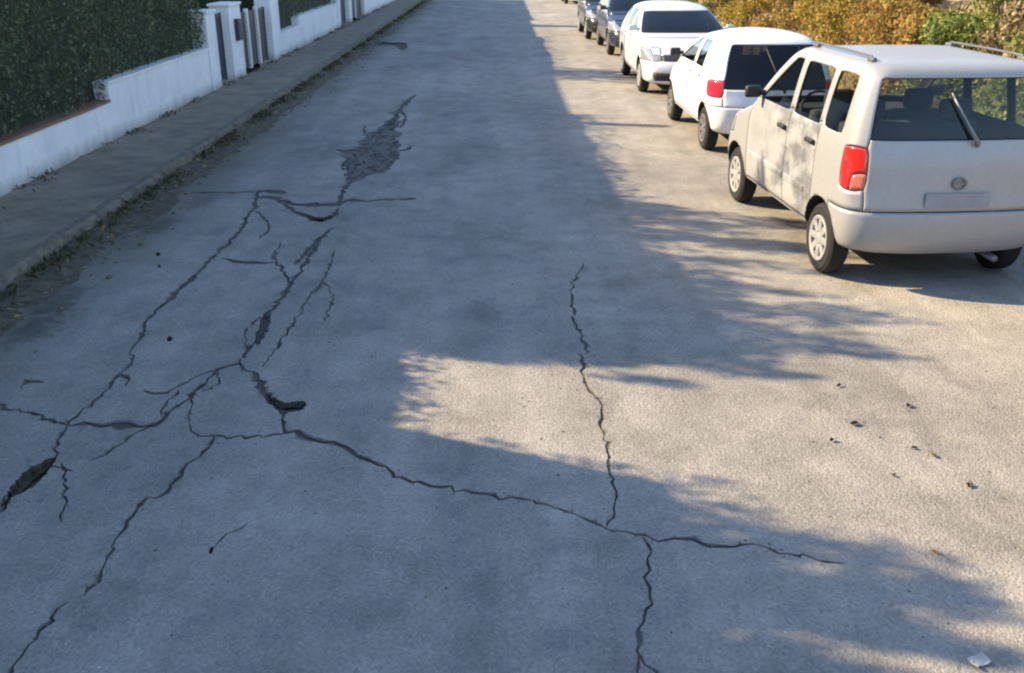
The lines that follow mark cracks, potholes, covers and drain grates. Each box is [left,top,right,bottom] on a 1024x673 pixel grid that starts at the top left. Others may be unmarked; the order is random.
crack [0,95,844,673]
